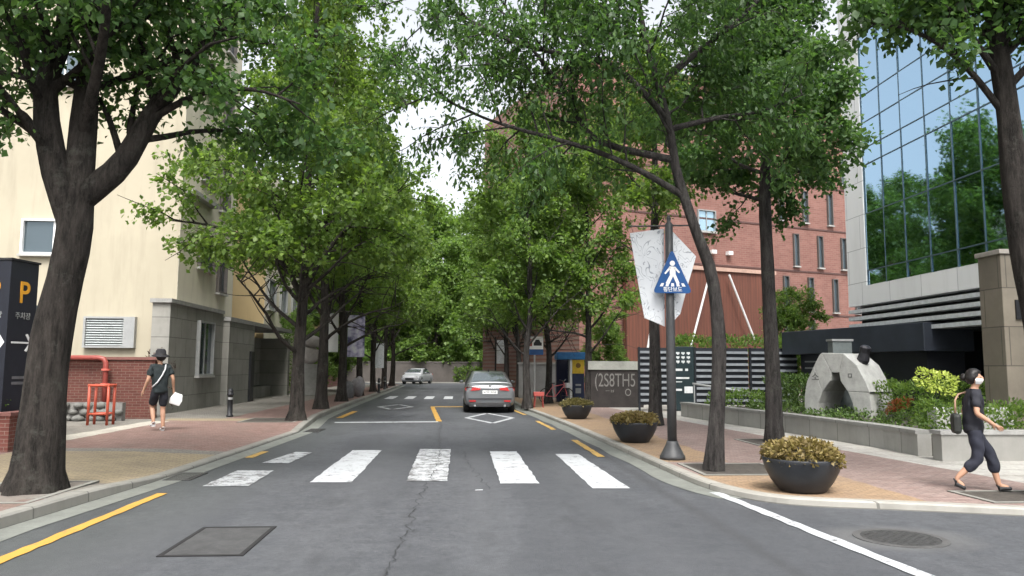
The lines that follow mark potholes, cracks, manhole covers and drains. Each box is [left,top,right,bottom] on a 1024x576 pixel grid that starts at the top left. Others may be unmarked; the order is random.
crack [381,424,442,576]
manhole cover [156,526,277,557]
manhole cover [852,528,951,549]
